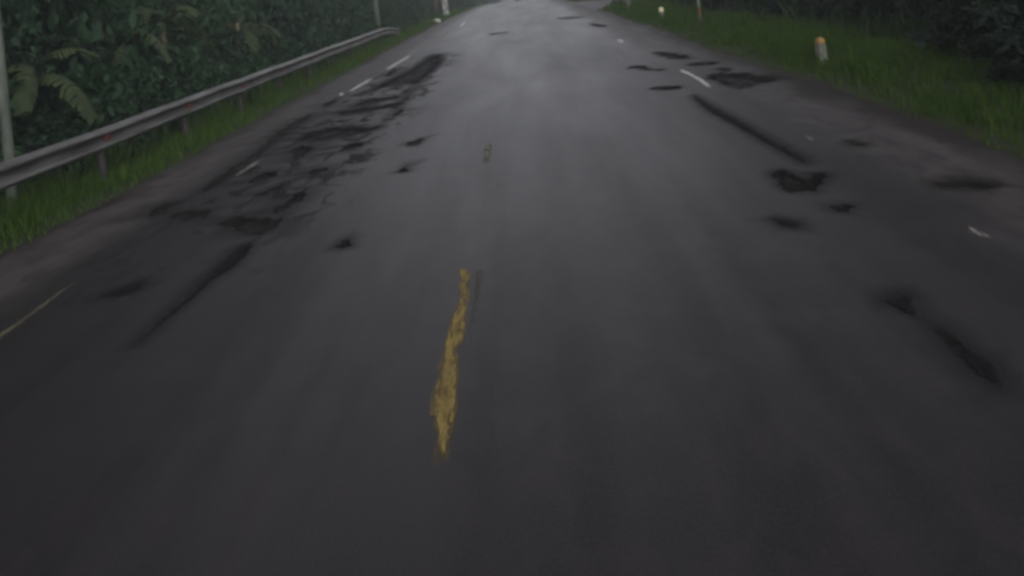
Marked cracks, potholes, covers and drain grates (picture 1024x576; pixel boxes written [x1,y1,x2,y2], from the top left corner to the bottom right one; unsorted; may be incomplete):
crack [693,95,809,164]
pothole [829,204,855,213]
pothole [707,72,777,89]
crack [200,114,311,192]
pothole [770,218,804,229]
crack [130,242,254,347]
crack [930,323,1007,390]
pothole [926,177,1004,190]
pothole [770,169,830,192]
